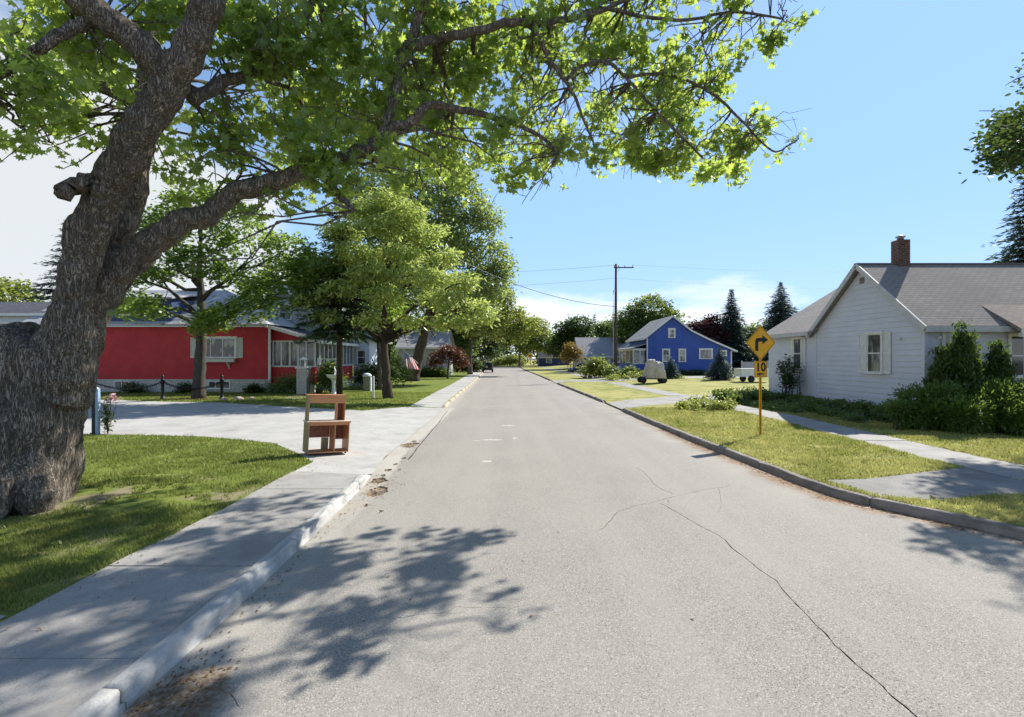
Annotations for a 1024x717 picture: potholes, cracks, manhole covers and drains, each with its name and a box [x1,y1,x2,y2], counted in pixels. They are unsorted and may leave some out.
crack [605,468,917,717]
